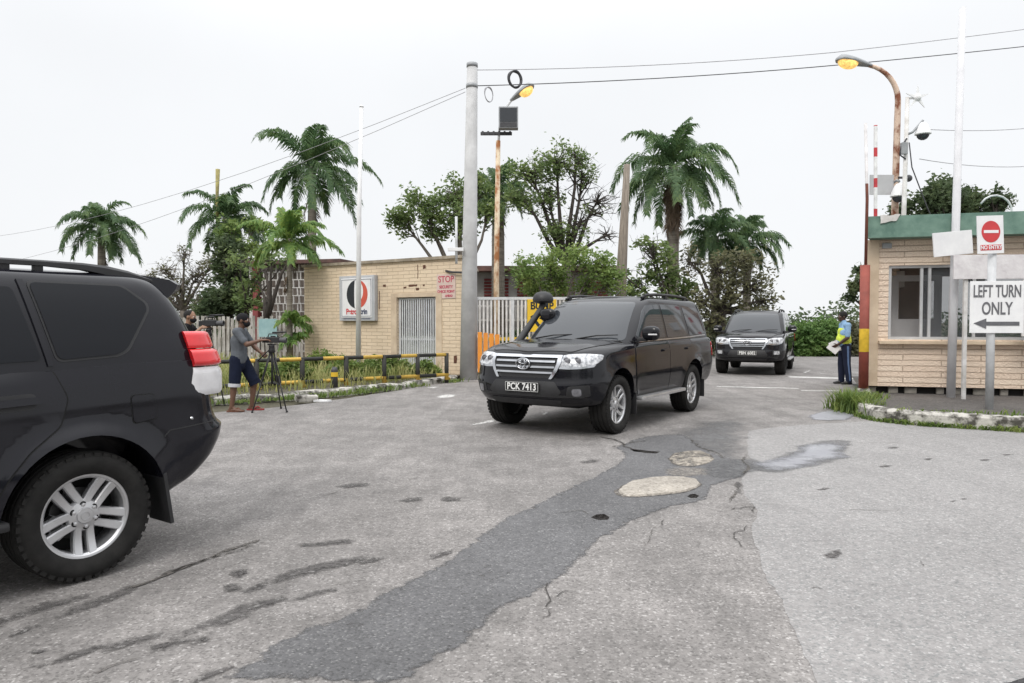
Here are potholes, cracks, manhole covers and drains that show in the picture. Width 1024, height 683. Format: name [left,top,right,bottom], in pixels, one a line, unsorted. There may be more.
manhole cover [614,476,702,497]
crack [544,583,575,617]
crack [729,454,755,547]
manhole cover [667,451,714,467]
